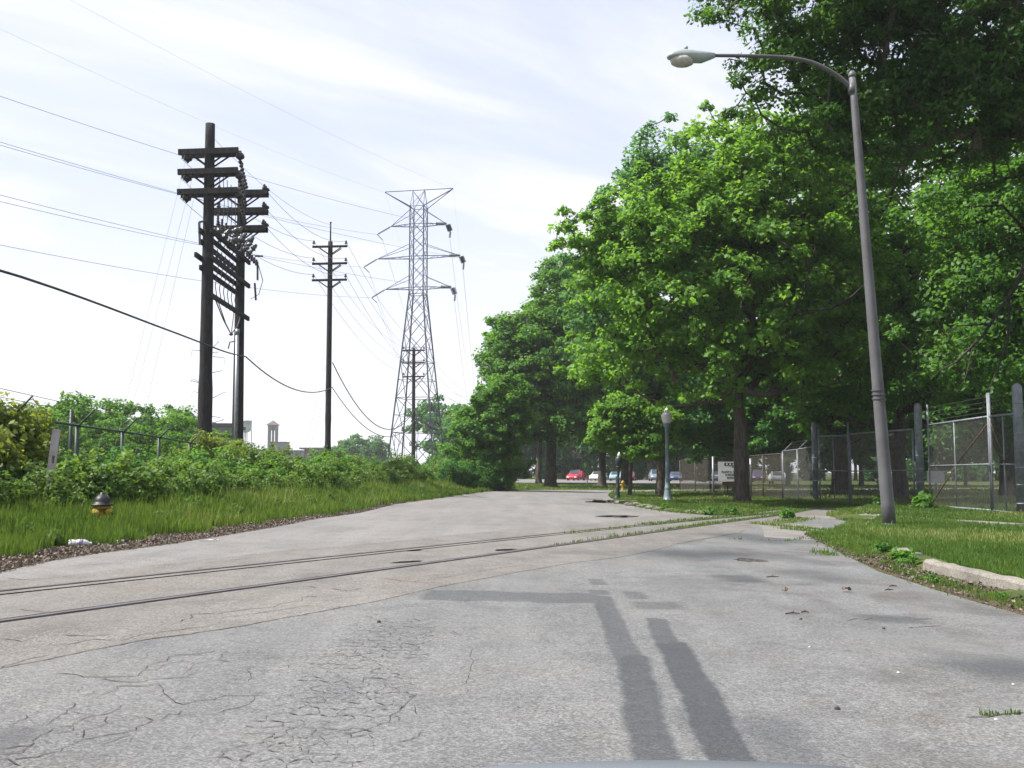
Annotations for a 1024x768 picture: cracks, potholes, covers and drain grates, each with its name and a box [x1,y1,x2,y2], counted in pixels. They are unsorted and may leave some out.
crack [1,614,437,767]
